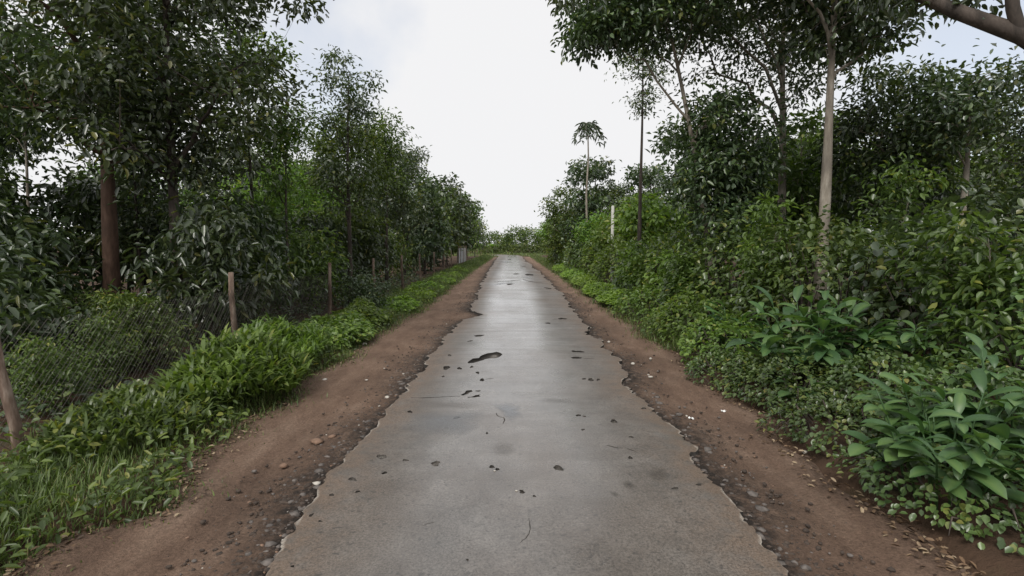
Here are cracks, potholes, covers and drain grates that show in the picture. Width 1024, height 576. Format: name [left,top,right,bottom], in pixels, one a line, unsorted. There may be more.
pothole [468,352,502,363]
